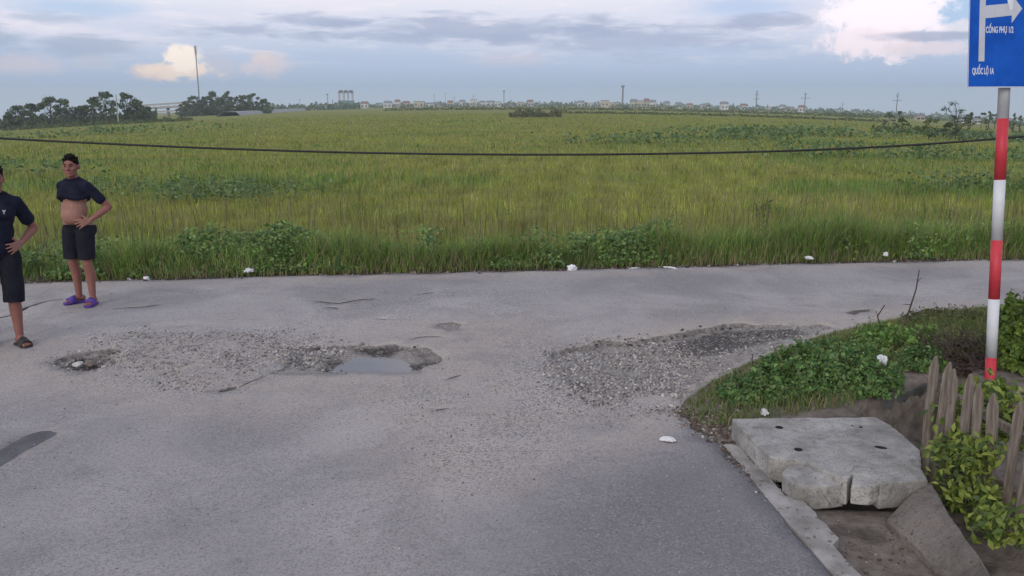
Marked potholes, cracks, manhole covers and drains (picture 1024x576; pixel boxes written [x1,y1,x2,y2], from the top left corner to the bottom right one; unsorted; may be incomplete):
pothole [50,349,117,372]
pothole [269,344,442,374]
pothole [437,322,462,331]
pothole [550,323,832,389]
